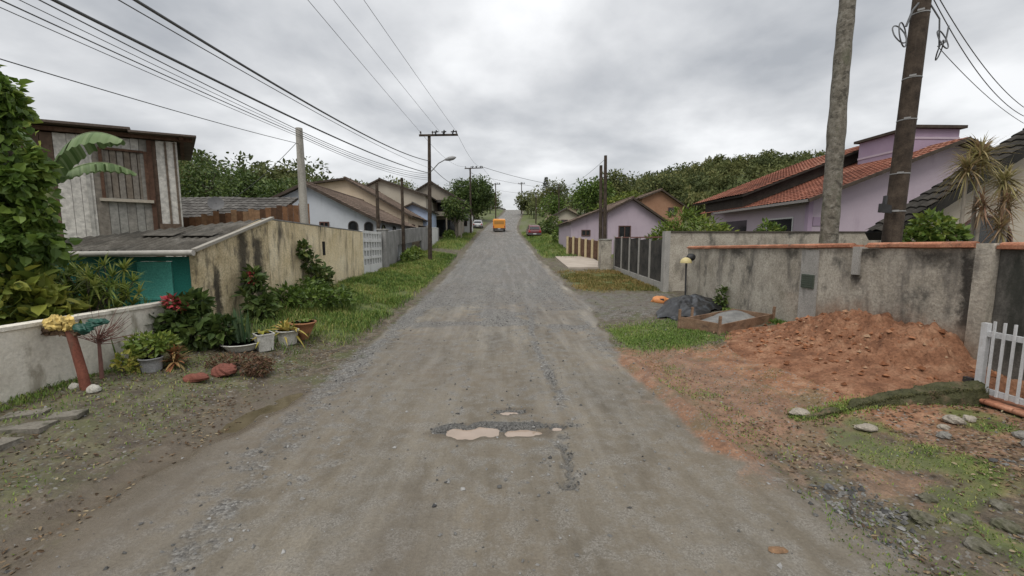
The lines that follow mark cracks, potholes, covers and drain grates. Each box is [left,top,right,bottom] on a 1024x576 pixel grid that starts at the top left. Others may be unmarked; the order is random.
pothole [494,408,527,416]
pothole [437,423,550,440]
